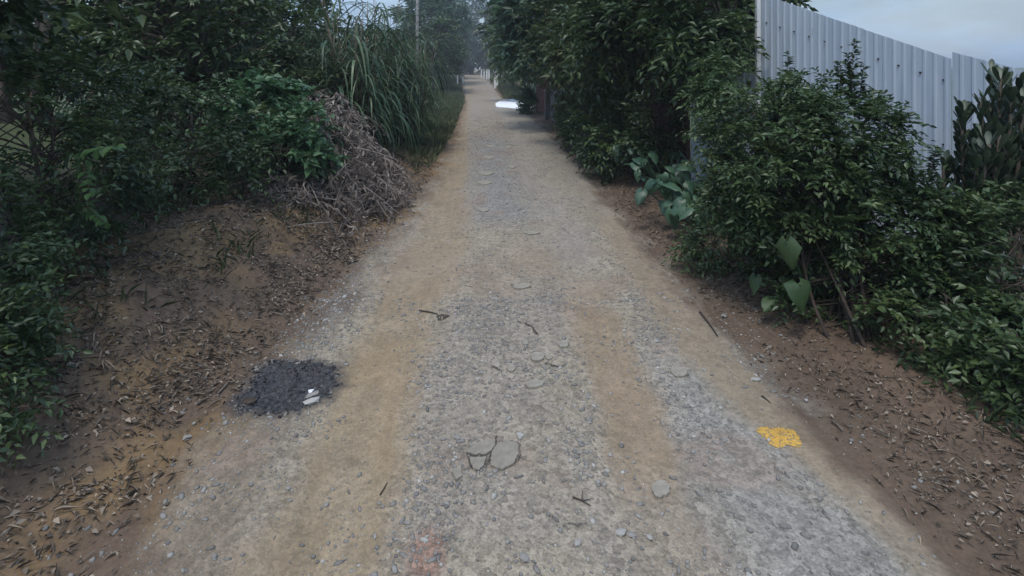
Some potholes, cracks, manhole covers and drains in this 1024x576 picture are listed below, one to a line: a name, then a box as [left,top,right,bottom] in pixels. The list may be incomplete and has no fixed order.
crack [466,435,521,471]
